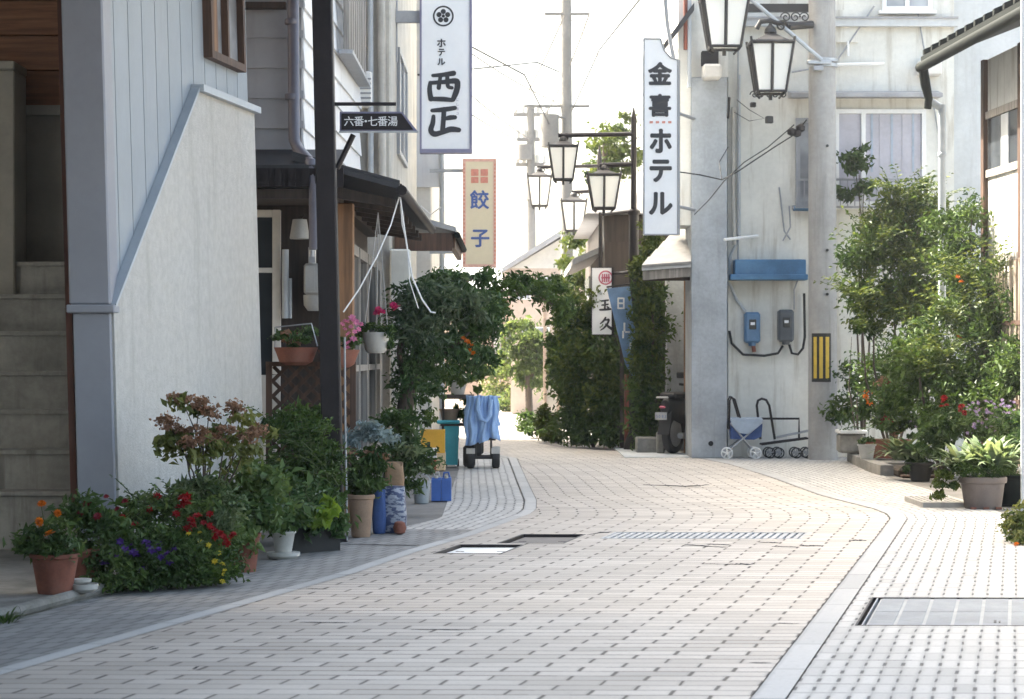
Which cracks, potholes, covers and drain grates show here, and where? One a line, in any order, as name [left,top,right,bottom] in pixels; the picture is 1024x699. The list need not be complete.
manhole cover [435,544,526,554]
manhole cover [498,534,586,543]
